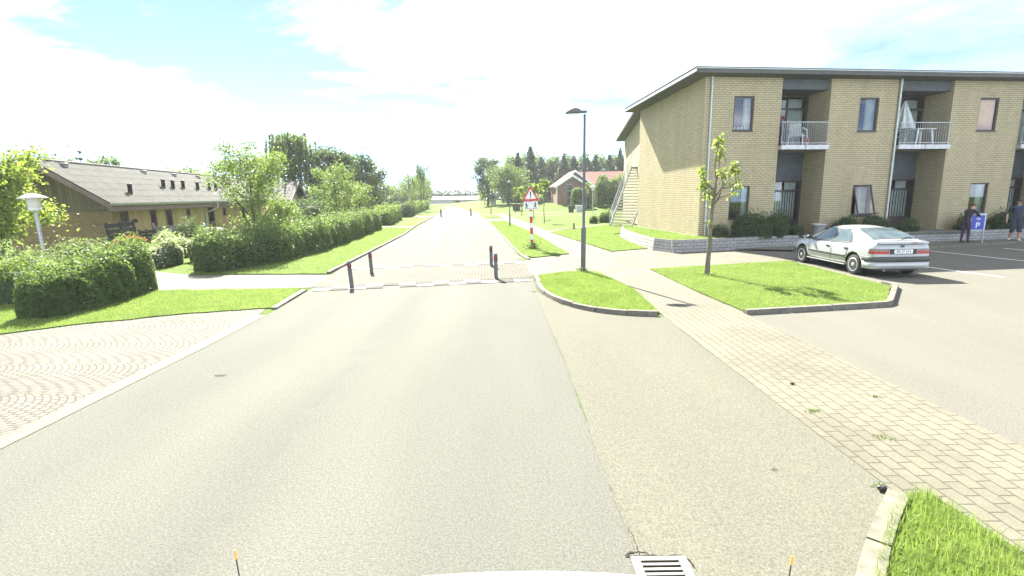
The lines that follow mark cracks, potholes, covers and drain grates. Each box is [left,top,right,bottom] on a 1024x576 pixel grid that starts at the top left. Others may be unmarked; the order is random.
crack [625,527,696,569]
drain grate [630,556,695,576]
